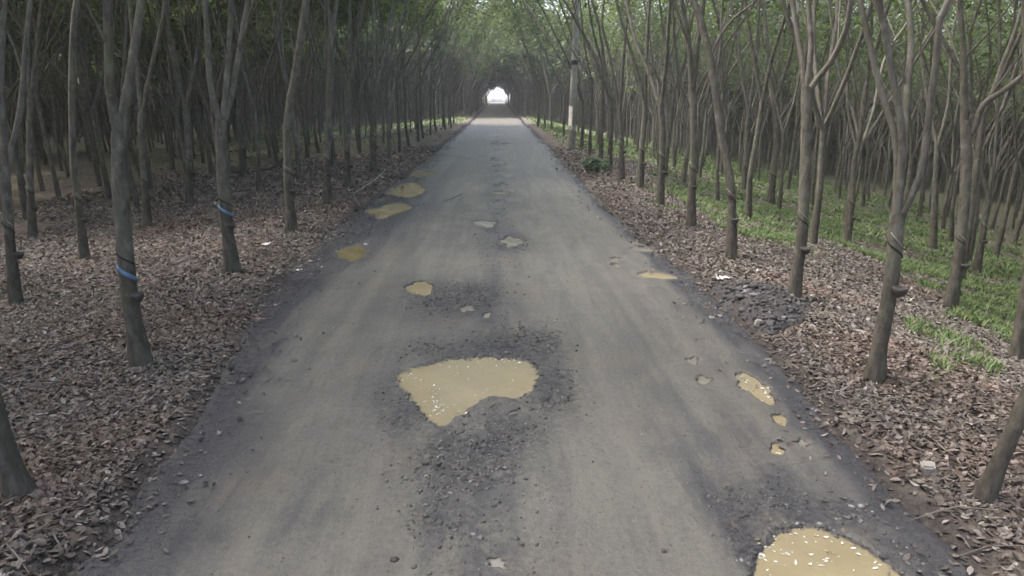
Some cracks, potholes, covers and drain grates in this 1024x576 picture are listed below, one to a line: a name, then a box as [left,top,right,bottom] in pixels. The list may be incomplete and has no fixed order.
pothole [626,268,689,282]
pothole [724,510,931,576]
pothole [721,364,791,414]
pothole [407,169,444,178]
pothole [488,234,534,250]
pothole [379,347,559,437]
pothole [324,241,377,263]
pothole [381,181,437,199]
pothole [392,278,444,298]
